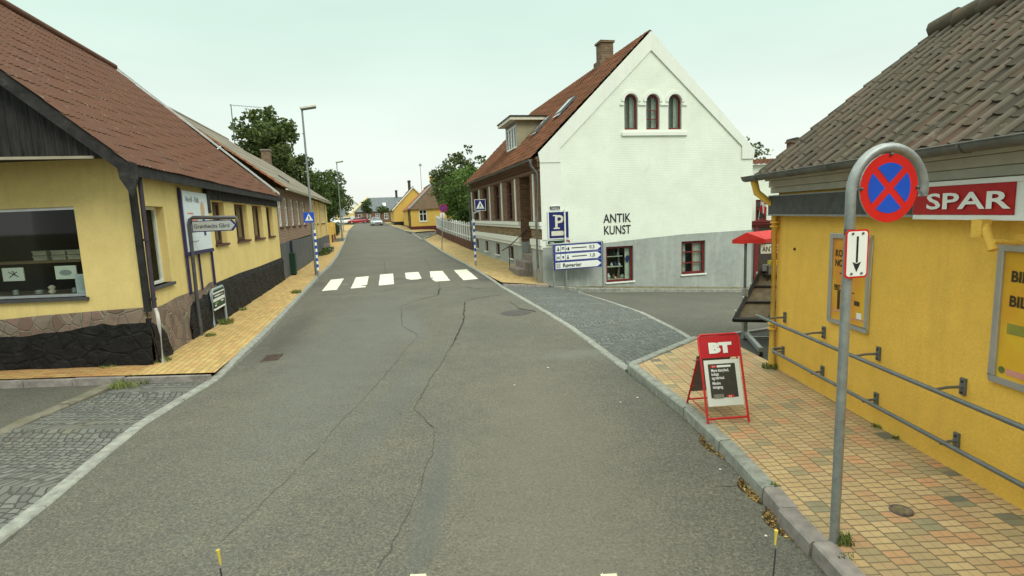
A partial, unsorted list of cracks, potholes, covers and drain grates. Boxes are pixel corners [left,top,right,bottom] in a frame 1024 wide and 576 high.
crack [228,284,496,576]
utility cover [888,504,914,517]
